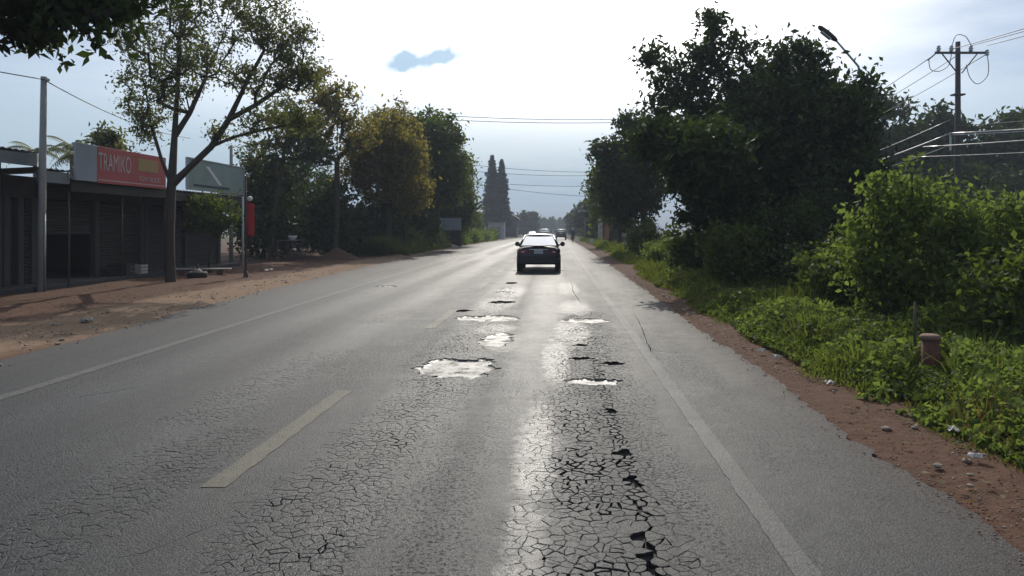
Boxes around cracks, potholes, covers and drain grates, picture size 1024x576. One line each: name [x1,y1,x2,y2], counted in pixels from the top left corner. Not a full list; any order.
crack [0,283,730,576]
pothole [411,358,501,380]
pothole [478,333,515,347]
pothole [631,533,661,576]
pothole [564,378,624,386]
